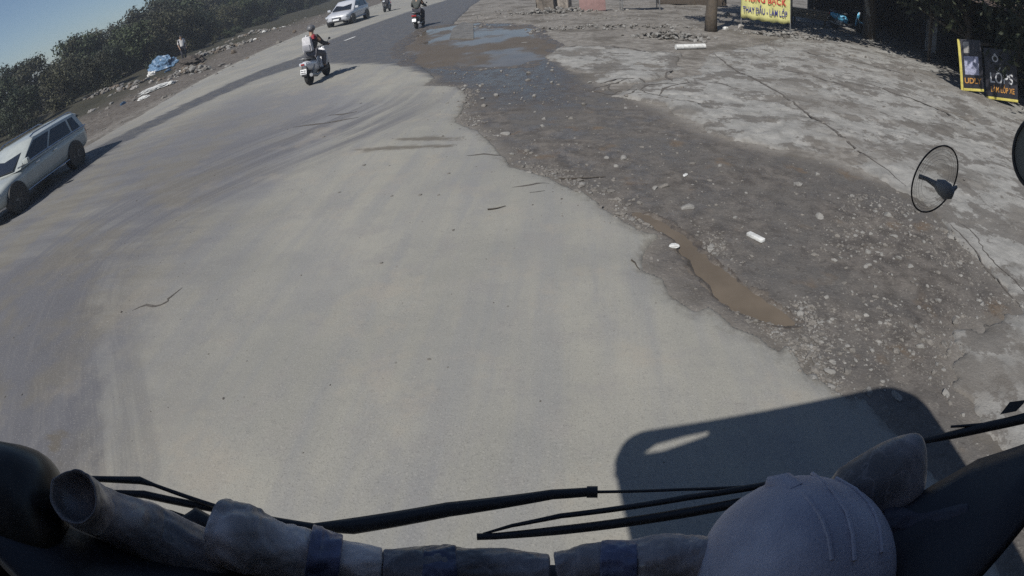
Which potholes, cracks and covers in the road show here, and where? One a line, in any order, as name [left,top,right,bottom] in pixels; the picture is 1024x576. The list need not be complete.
crack [134,289,180,310]
crack [581,70,738,107]
pothole [630,212,806,330]
pothole [388,22,565,71]
crack [774,50,970,122]
